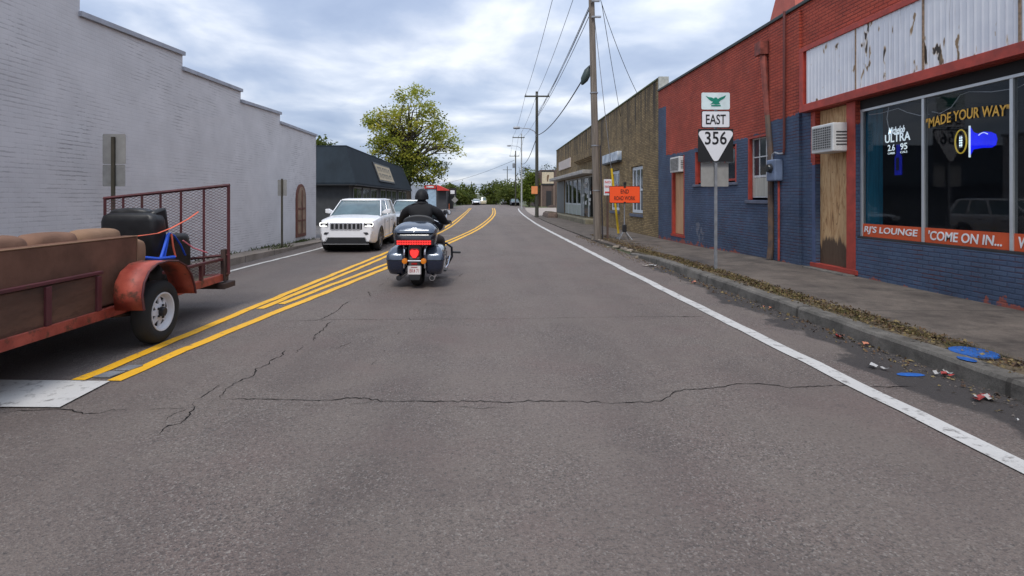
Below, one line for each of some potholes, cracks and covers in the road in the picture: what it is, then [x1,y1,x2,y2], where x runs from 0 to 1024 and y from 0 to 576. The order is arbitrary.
crack [10,274,902,434]
